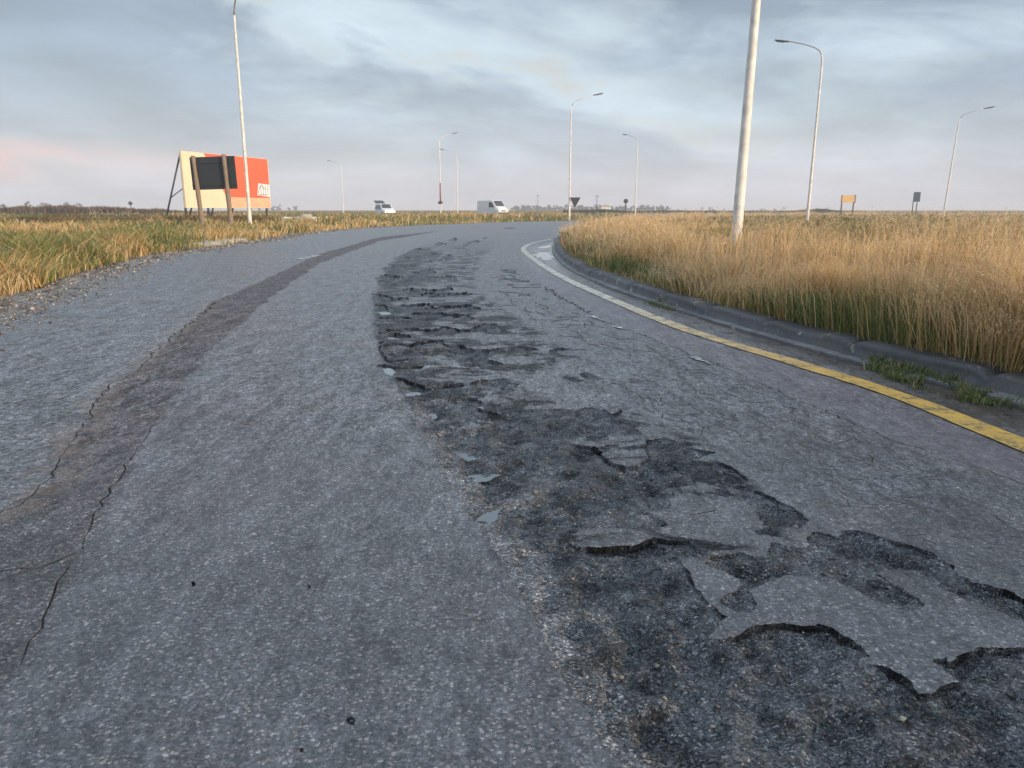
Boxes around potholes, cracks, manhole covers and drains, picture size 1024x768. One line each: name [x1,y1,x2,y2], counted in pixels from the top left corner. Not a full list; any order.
pothole [373,304,390,315]
pothole [371,293,409,303]
pothole [382,340,540,368]
pothole [377,312,475,323]
pothole [390,303,483,312]
pothole [394,376,465,397]
pothole [470,378,521,396]
pothole [394,248,430,260]
pothole [378,332,412,340]
pothole [440,275,460,283]
